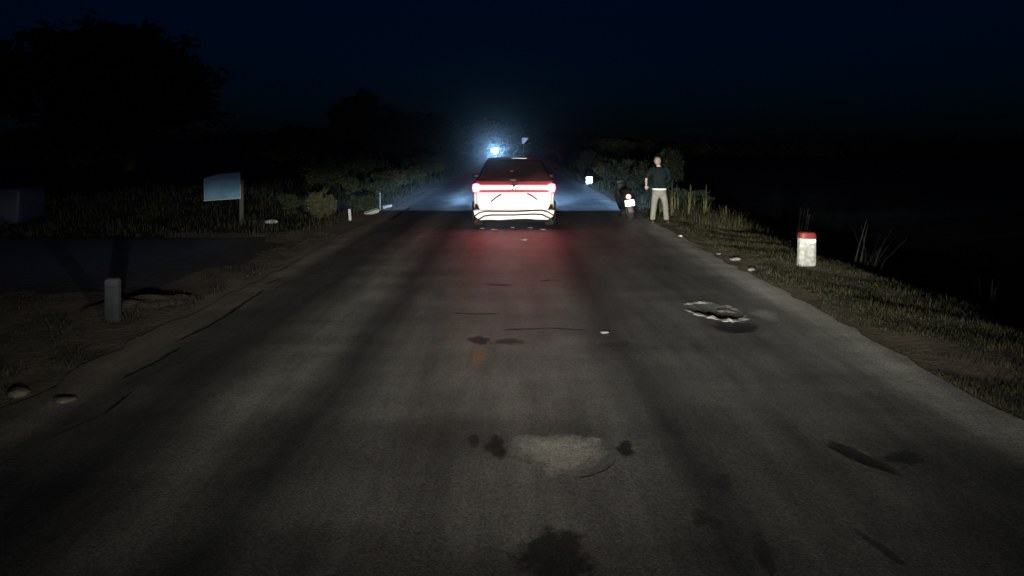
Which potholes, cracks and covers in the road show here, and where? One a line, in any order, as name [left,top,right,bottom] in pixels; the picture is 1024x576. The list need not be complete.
crack [449,312,586,330]
pothole [465,334,491,345]
pothole [613,439,638,459]
pothole [487,336,529,346]
pothole [482,432,509,460]
crack [573,460,616,478]
pothole [466,432,480,448]
pothole [684,301,750,323]
